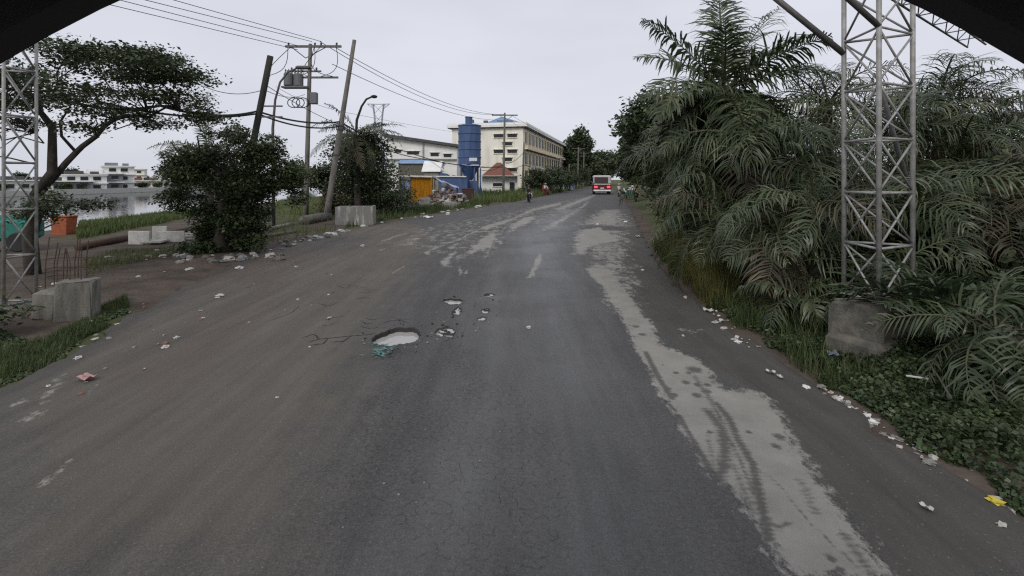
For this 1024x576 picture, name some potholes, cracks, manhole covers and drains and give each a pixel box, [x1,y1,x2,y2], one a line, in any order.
pothole [366,326,427,349]
crack [272,306,411,345]
pothole [432,325,459,338]
